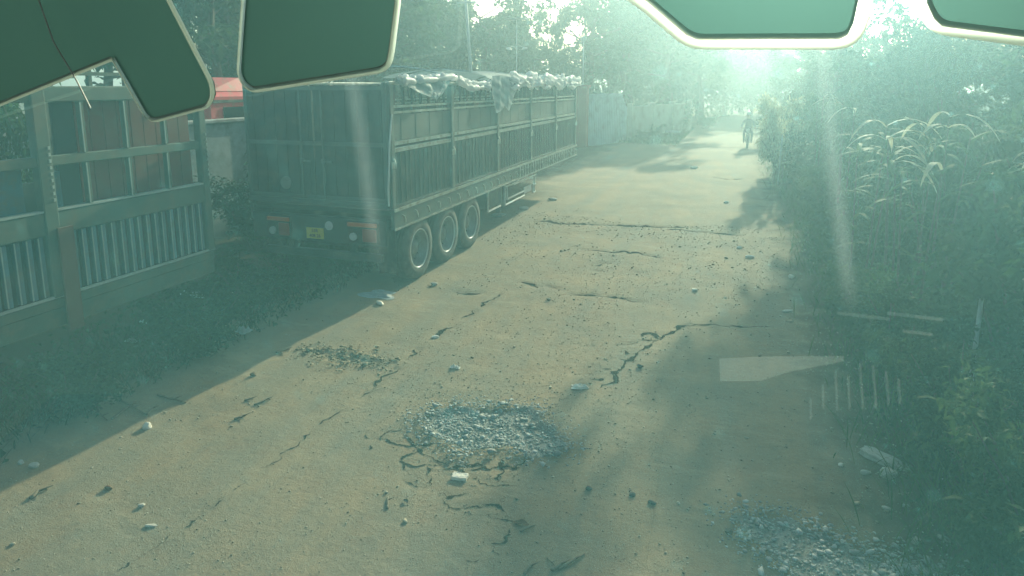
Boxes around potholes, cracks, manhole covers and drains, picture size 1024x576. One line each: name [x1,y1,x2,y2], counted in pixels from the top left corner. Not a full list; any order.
pothole [703,492,924,576]
pothole [280,341,406,372]
pothole [401,393,592,471]
crack [365,430,527,562]
crack [592,324,773,388]
crack [435,292,501,336]
crack [540,220,739,236]
